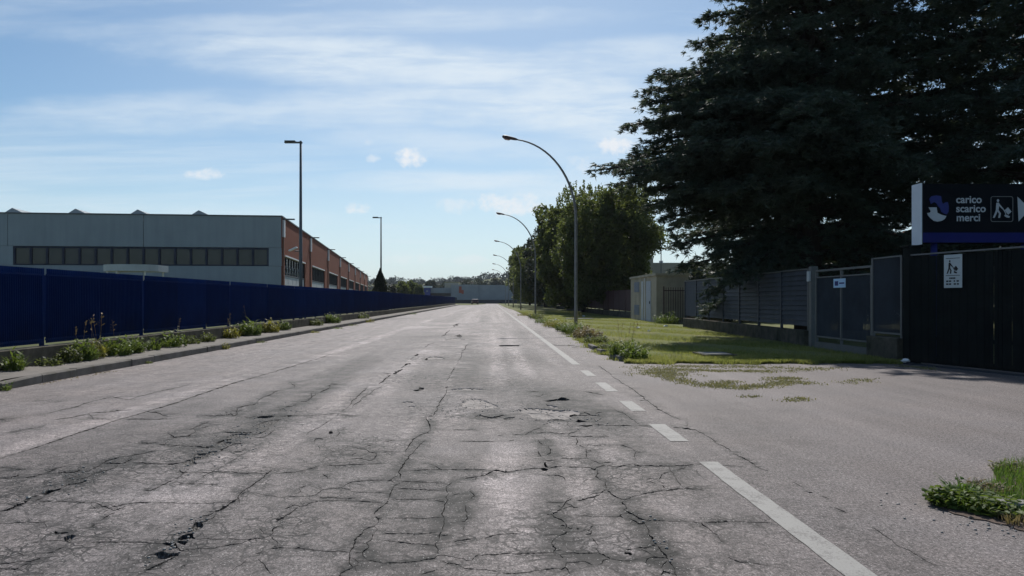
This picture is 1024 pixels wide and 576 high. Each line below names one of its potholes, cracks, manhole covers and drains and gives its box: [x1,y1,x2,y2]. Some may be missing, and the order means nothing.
crack [0,324,768,576]
pothole [155,551,179,559]
